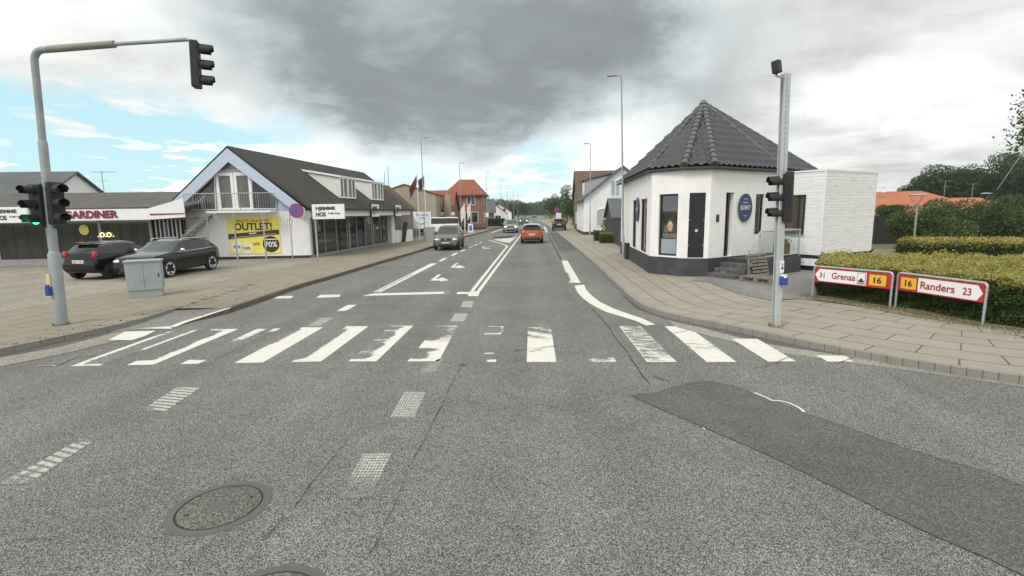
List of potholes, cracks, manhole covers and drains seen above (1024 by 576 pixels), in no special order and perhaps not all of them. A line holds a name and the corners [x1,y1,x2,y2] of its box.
manhole cover [247,565,326,576]
crack [258,442,346,549]
manhole cover [163,481,272,537]
crack [369,365,462,554]
